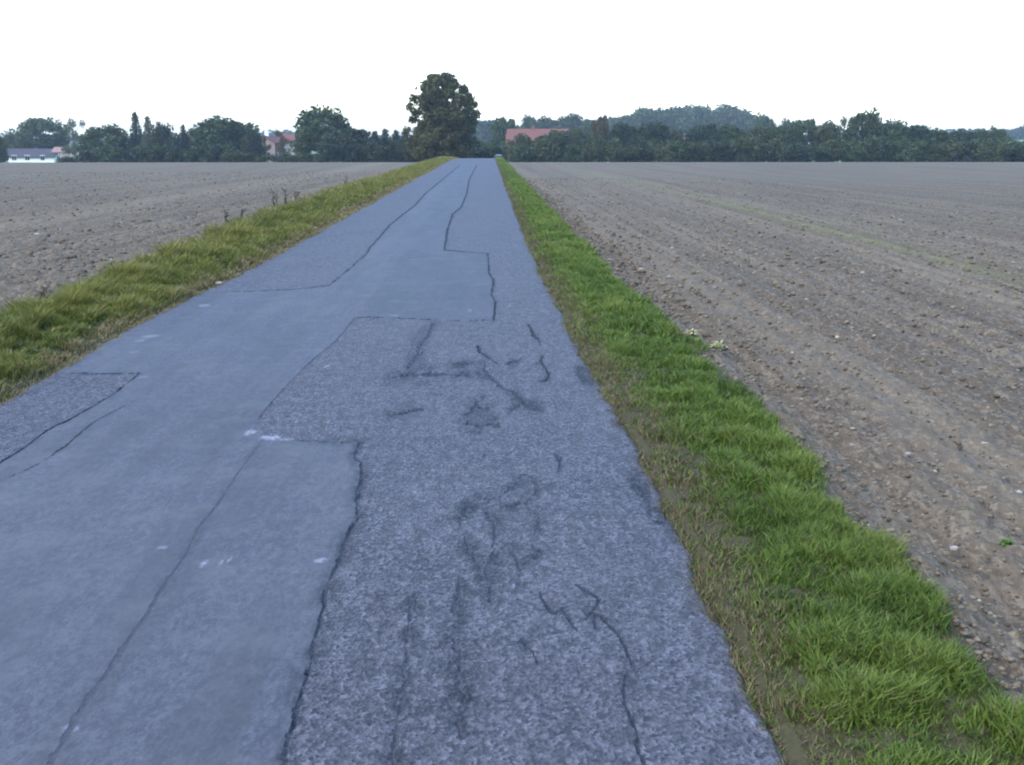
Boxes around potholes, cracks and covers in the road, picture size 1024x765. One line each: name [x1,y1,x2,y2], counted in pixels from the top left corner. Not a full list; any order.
crack [277,440,364,765]
crack [390,591,416,765]
crack [0,372,140,477]
crack [449,454,646,765]
crack [393,323,551,428]
